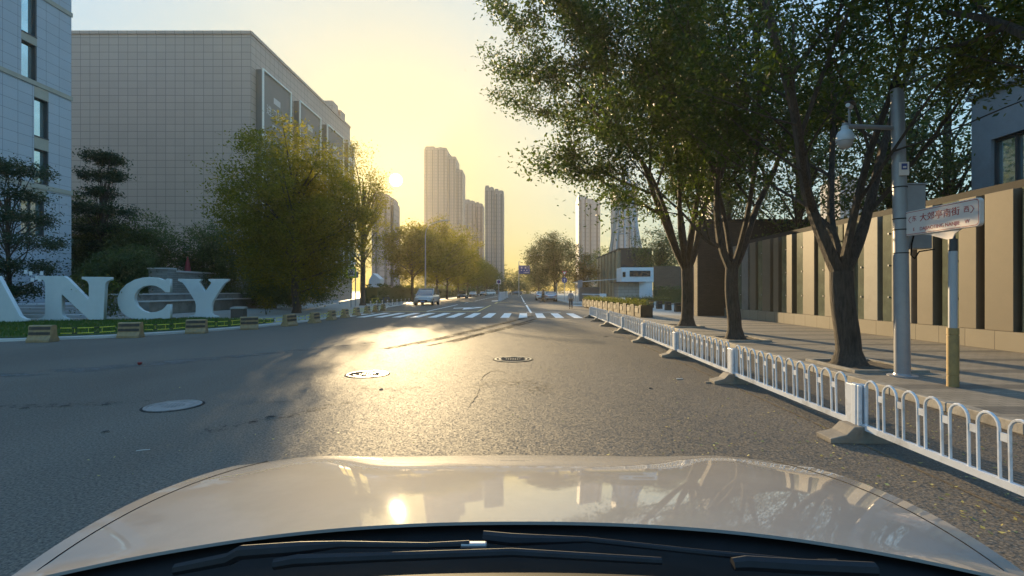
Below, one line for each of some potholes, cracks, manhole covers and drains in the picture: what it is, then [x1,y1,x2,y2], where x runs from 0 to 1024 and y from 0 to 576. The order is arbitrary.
manhole cover [139,400,205,413]
manhole cover [344,370,390,378]
